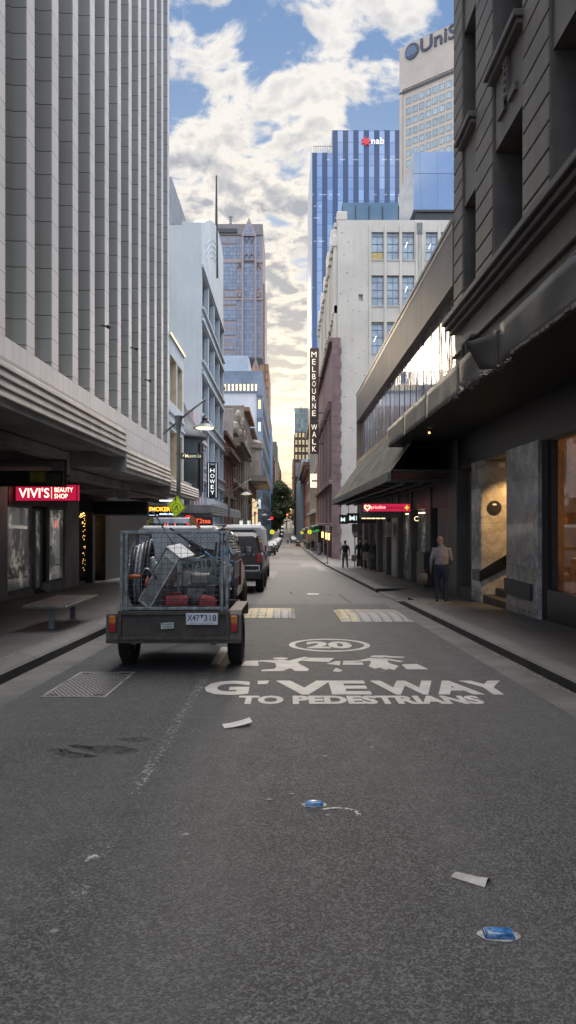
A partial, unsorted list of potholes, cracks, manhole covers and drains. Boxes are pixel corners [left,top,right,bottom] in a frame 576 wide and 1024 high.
pothole [69,745,140,754]
